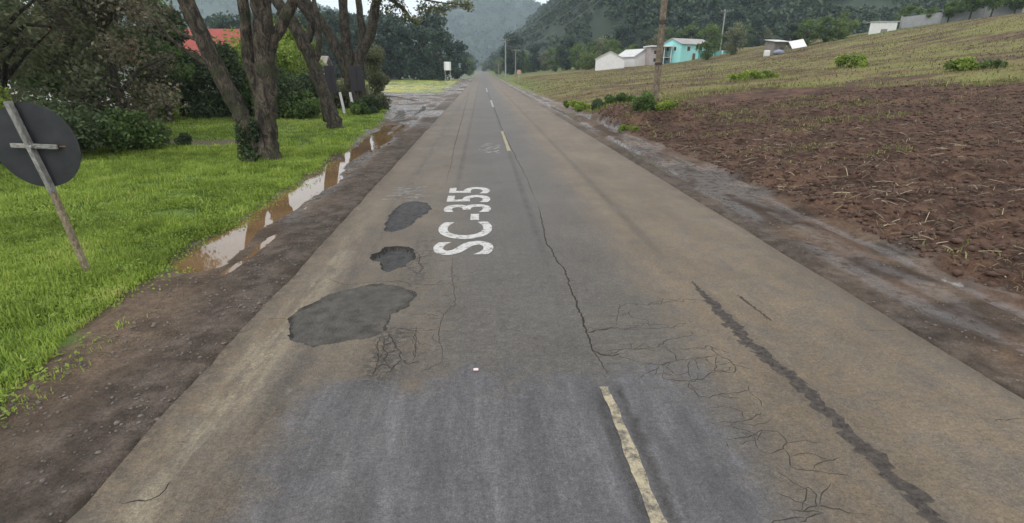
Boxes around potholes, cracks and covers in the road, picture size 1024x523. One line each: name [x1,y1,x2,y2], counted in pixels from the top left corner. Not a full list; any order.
crack [363,258,464,381]
crack [488,95,948,523]
crack [121,480,173,504]
